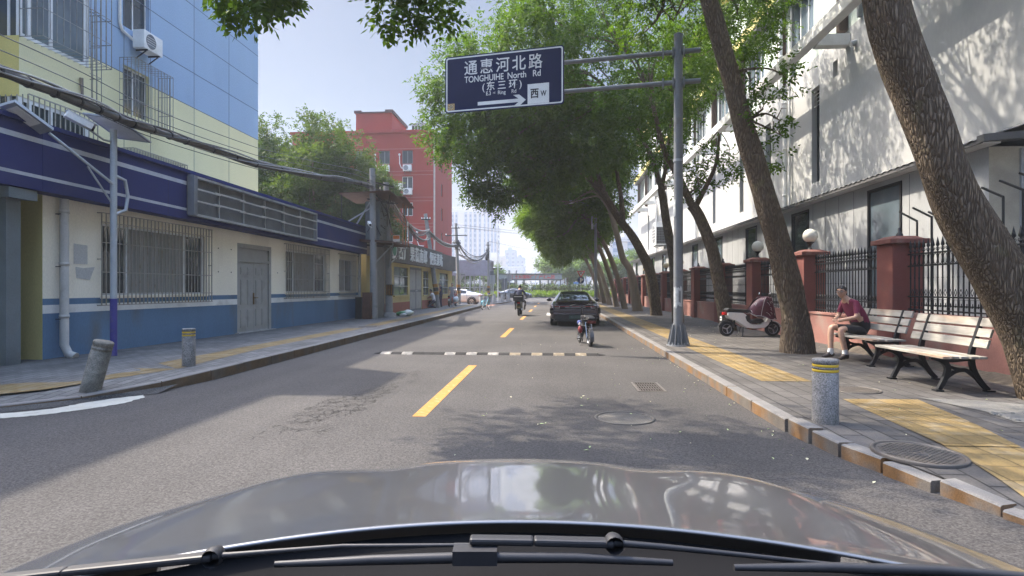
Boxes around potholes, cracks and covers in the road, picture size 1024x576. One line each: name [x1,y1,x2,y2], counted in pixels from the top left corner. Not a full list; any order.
manhole cover [870,440,972,469]
drain grate [630,382,667,392]
manhole cover [839,385,883,394]
crack [252,371,422,440]
manhole cover [594,411,655,426]
